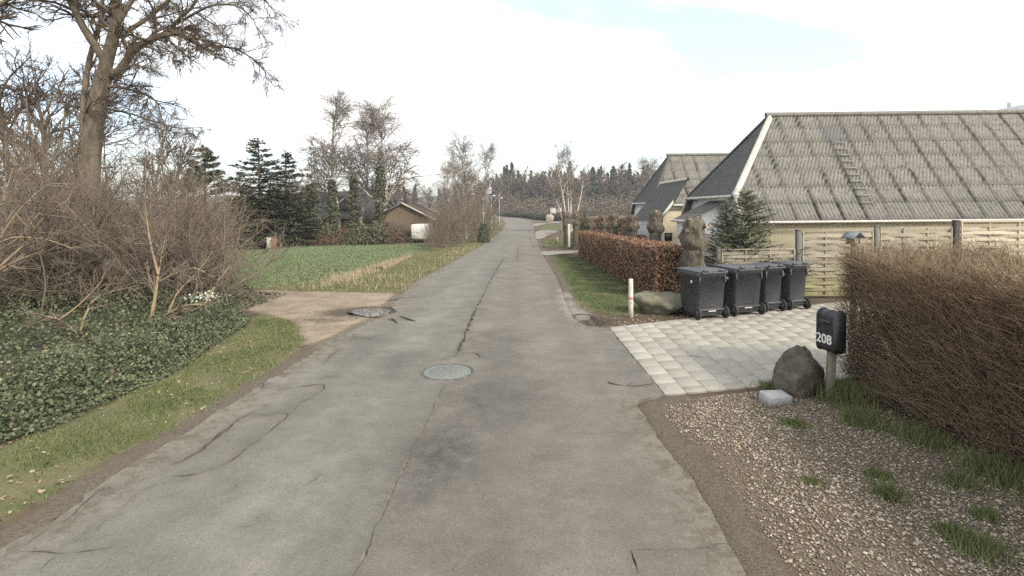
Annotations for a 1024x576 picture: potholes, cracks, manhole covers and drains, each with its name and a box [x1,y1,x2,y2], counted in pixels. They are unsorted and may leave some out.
crack [436,238,534,361]
manhole cover [420,364,475,381]
crack [21,487,149,568]
crack [161,337,370,484]
